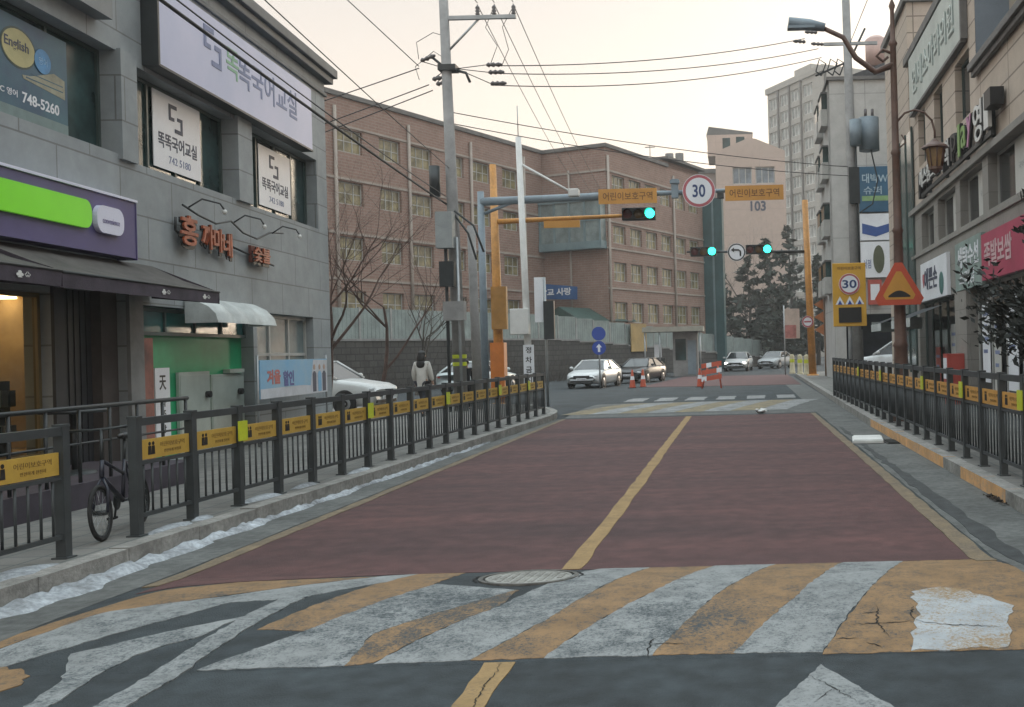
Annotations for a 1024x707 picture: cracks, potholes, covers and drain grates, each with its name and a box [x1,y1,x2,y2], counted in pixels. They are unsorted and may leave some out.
crack [837,605,998,646]
manhole cover [478,569,579,586]
